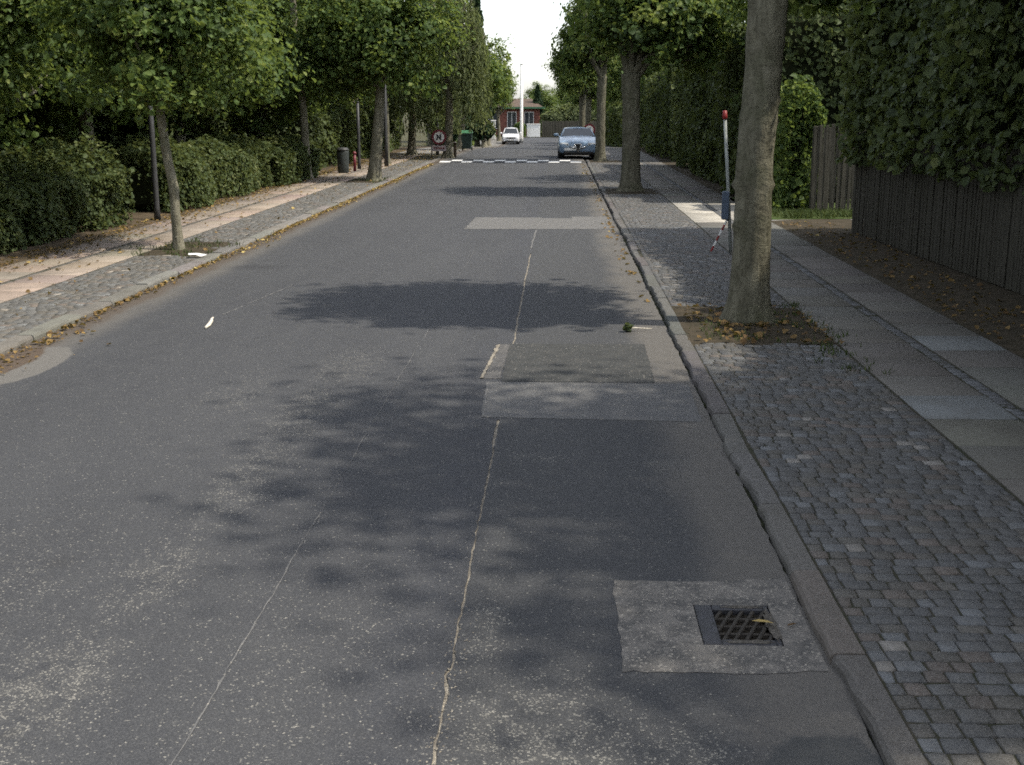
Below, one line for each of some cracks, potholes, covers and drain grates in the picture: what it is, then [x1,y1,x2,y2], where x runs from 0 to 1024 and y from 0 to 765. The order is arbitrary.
crack [170,255,472,765]
crack [419,230,537,765]
